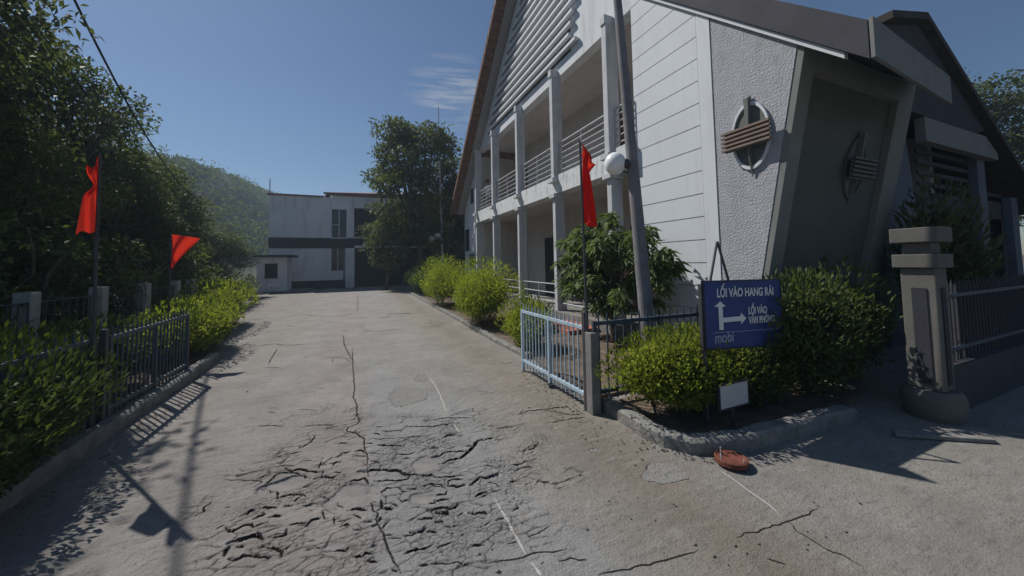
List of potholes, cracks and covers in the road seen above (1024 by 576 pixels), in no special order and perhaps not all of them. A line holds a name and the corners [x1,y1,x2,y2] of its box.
crack [195,299,698,575]
crack [738,509,862,566]
